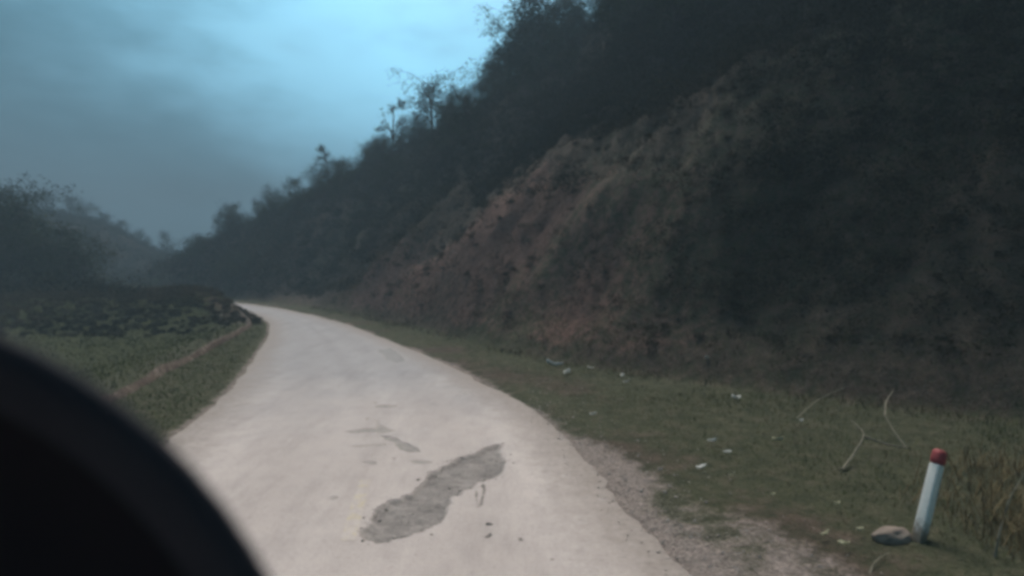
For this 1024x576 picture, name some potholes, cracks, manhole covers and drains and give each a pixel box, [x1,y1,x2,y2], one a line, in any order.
crack [475,483,486,509]
